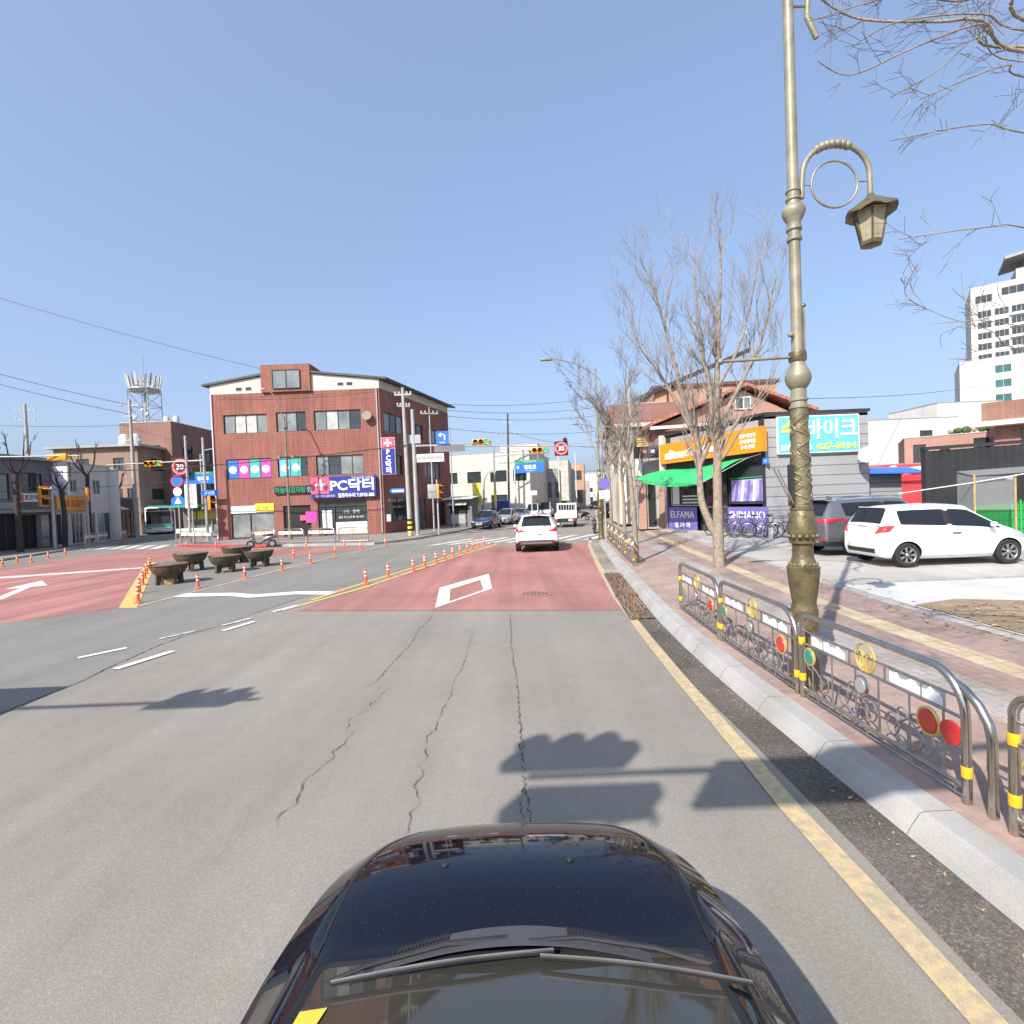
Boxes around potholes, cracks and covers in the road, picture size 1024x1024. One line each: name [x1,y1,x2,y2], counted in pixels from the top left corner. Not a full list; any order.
crack [406,650,467,833]
crack [275,611,434,829]
crack [509,615,531,822]
